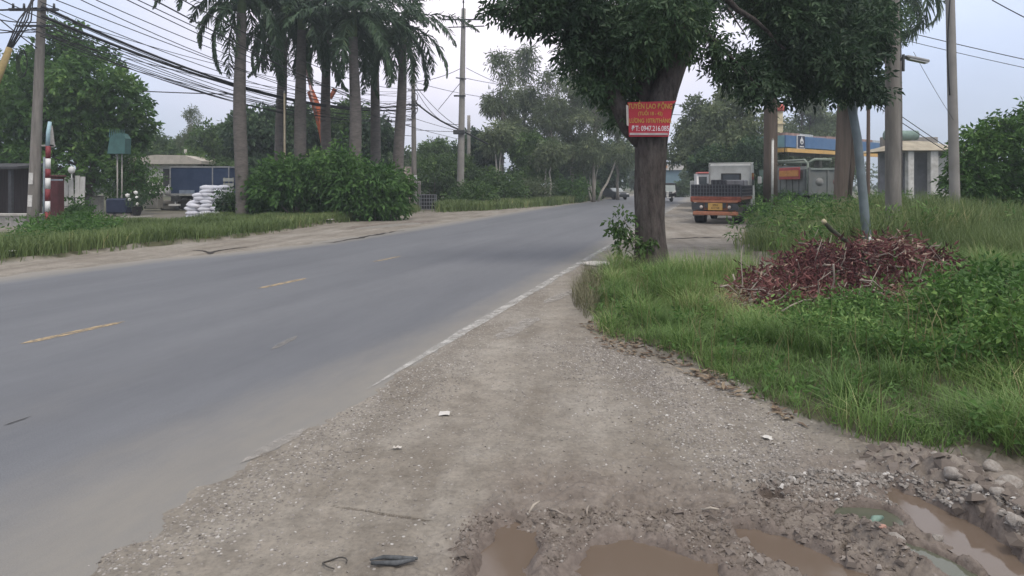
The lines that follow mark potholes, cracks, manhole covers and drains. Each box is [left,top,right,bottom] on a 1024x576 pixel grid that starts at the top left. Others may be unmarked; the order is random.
crack [331,505,437,521]
pothole [882,483,1024,576]
pothole [726,514,869,576]
pothole [830,497,908,527]
pothole [463,517,545,576]
pothole [549,537,744,576]
